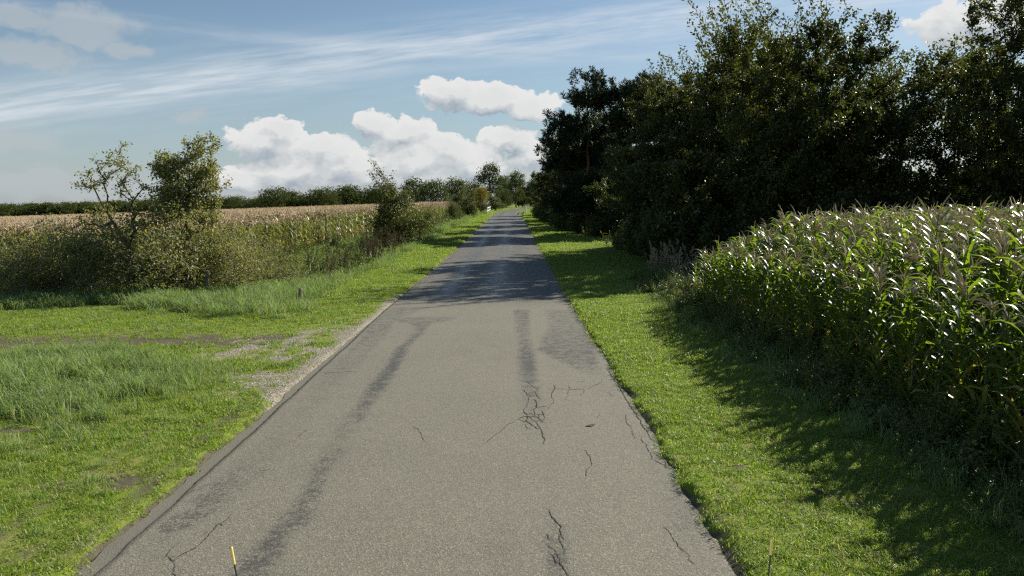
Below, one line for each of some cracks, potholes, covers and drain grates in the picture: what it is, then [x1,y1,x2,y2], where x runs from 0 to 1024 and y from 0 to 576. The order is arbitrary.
crack [489,376,667,469]
crack [163,507,254,576]
crack [546,512,569,576]
